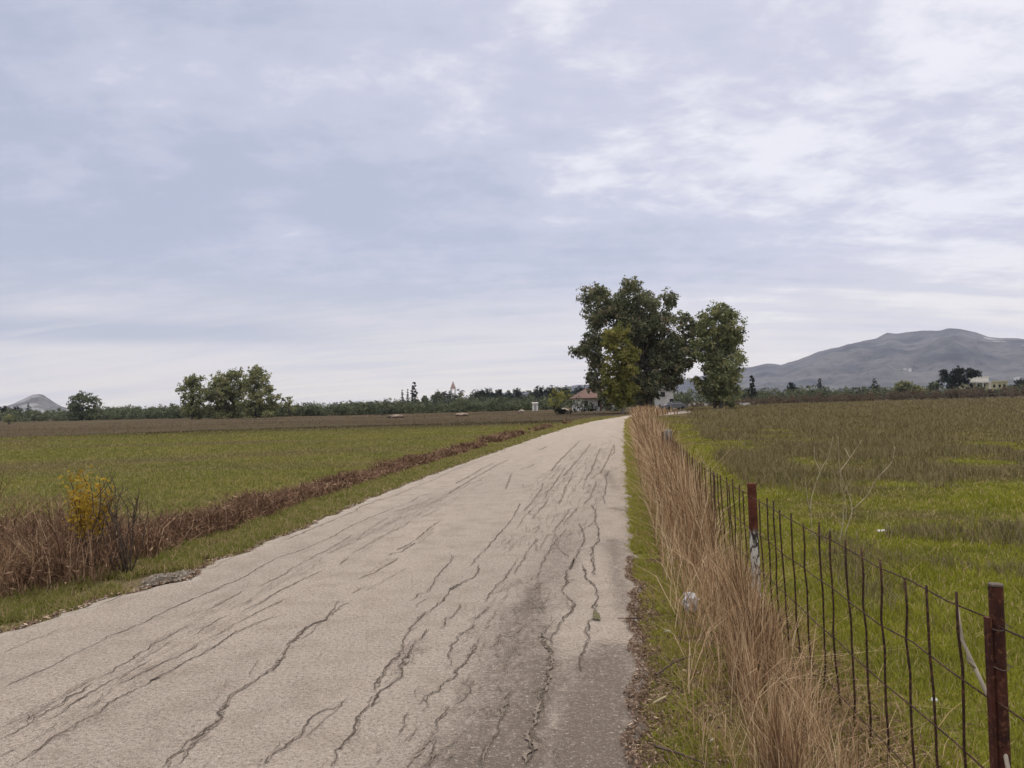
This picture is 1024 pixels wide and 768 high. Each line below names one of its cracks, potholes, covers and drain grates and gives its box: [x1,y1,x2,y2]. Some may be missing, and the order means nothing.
crack [1,441,615,767]
pothole [138,569,196,588]
